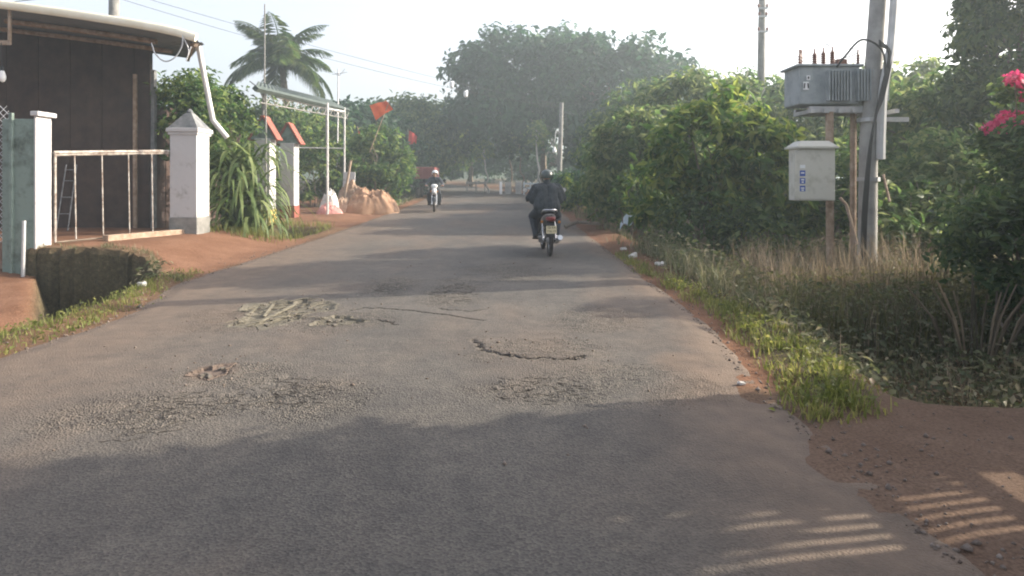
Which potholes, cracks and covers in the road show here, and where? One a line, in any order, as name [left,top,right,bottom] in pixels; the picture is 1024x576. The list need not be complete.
pothole [307,315,370,327]
pothole [224,296,341,331]
pothole [183,362,237,381]
crack [473,339,584,360]
crack [355,282,484,325]
